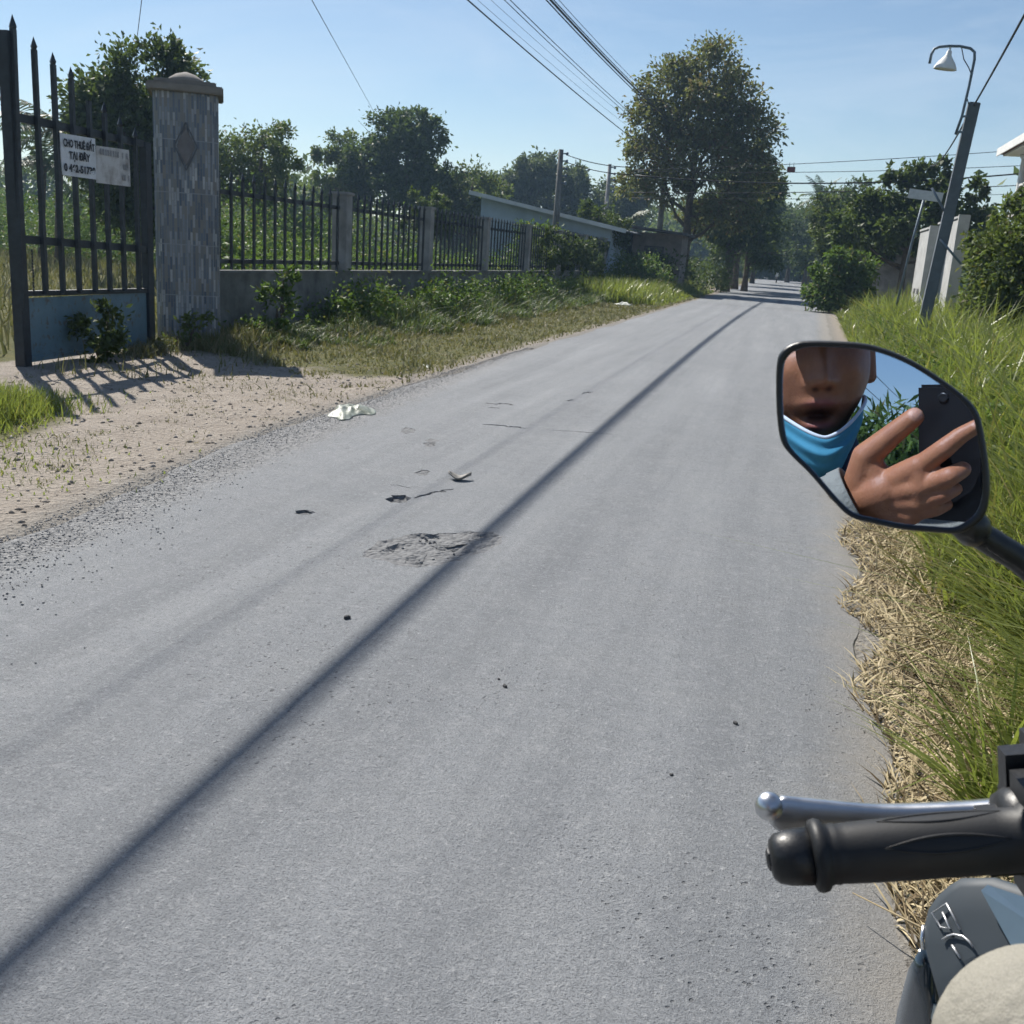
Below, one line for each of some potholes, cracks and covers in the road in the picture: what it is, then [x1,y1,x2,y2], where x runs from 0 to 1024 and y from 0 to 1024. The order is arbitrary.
crack [390,484,453,498]
pothole [362,531,505,568]
crack [482,403,521,428]
pothole [385,495,411,503]
